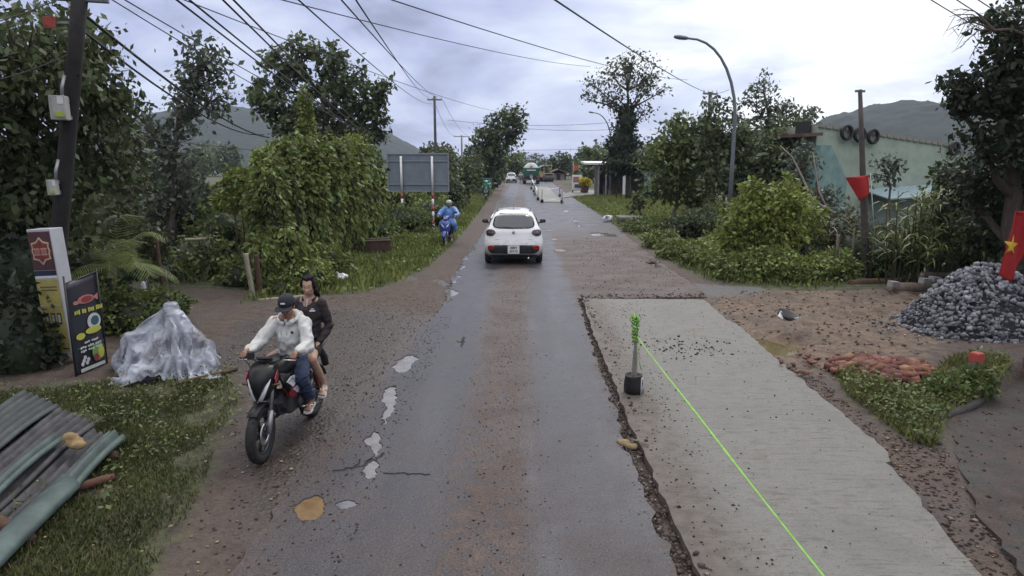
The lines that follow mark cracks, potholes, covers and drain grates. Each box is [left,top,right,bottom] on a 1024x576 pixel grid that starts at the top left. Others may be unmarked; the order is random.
pothole [335,499,359,510]
pothole [361,431,383,480]
crack [332,453,430,475]
pothole [391,354,419,373]
pothole [441,247,475,303]
pothole [380,386,398,425]
